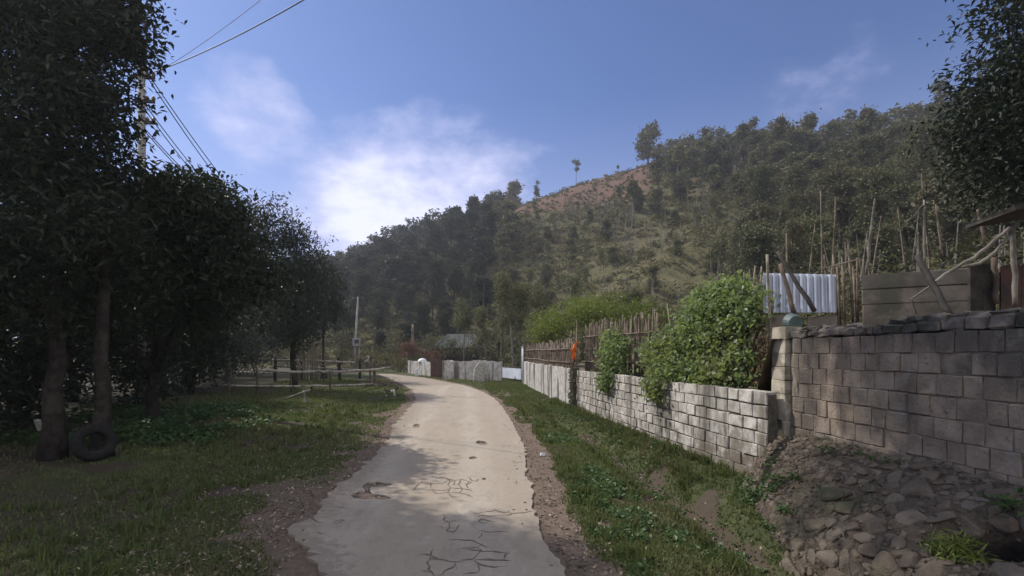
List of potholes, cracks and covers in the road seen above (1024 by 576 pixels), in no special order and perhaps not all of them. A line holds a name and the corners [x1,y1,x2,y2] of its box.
pothole [351,481,392,500]
crack [414,477,529,576]
